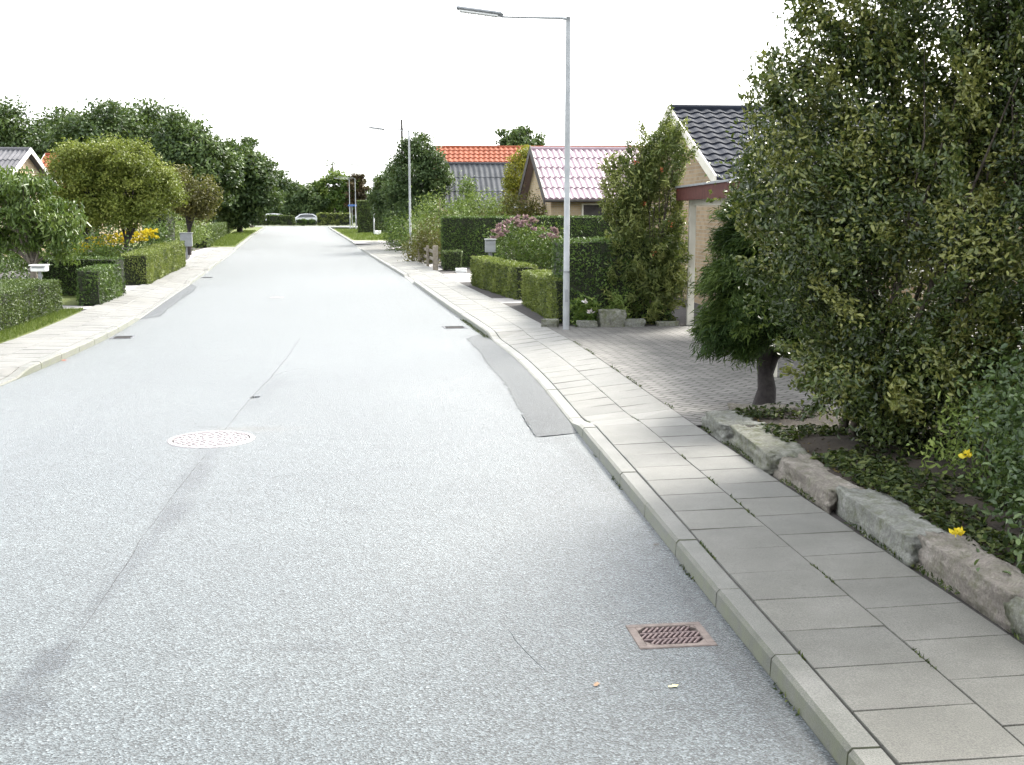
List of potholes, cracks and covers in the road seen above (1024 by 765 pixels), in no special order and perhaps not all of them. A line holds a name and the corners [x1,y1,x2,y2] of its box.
manhole cover [167,431,255,448]
drain grate [625,622,718,650]
